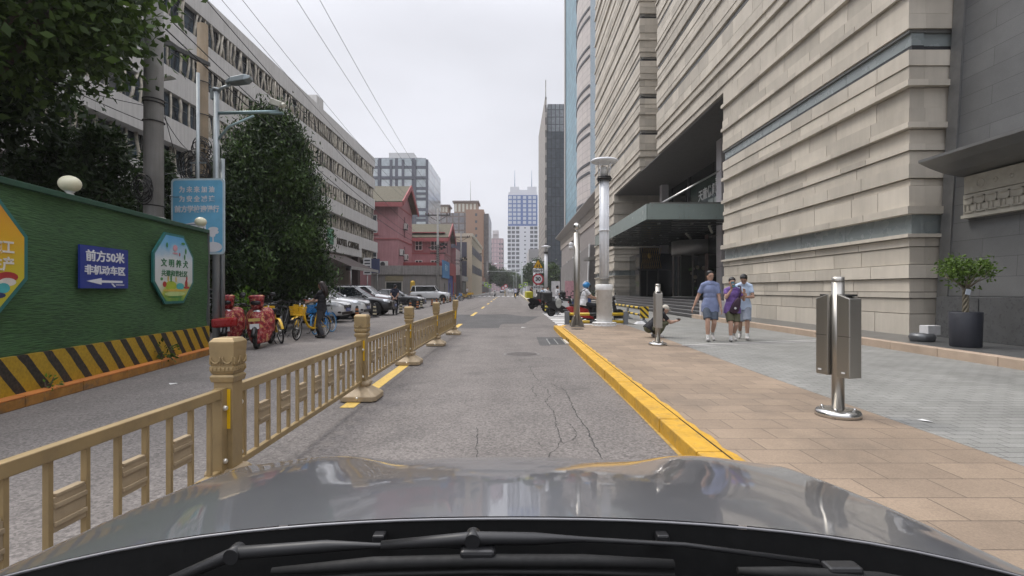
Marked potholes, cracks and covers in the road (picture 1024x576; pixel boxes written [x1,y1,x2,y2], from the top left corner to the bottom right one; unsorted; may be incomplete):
crack [530,367,602,458]
